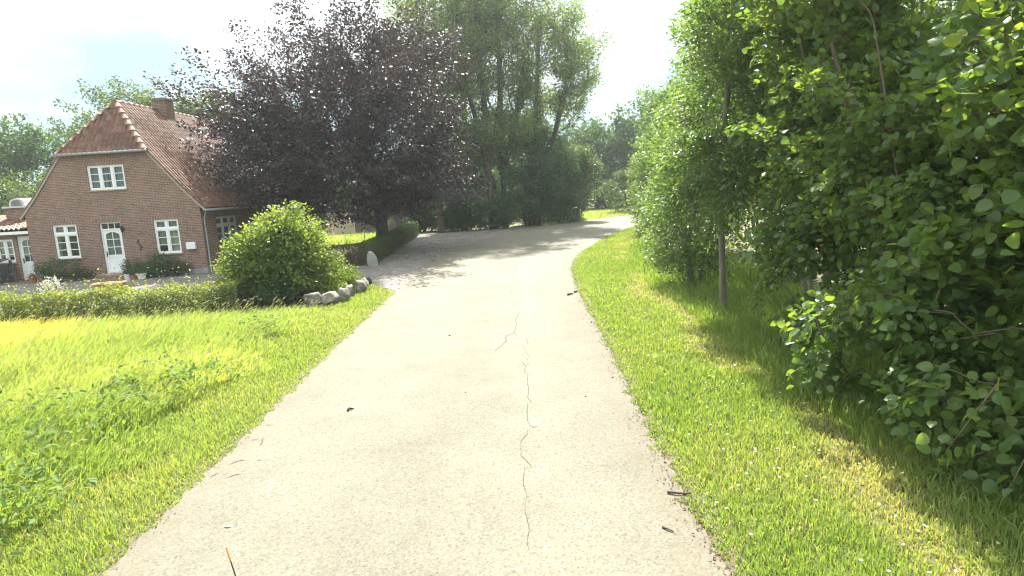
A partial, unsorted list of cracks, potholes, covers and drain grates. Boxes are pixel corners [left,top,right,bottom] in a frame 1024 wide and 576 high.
crack [495,265,537,548]
